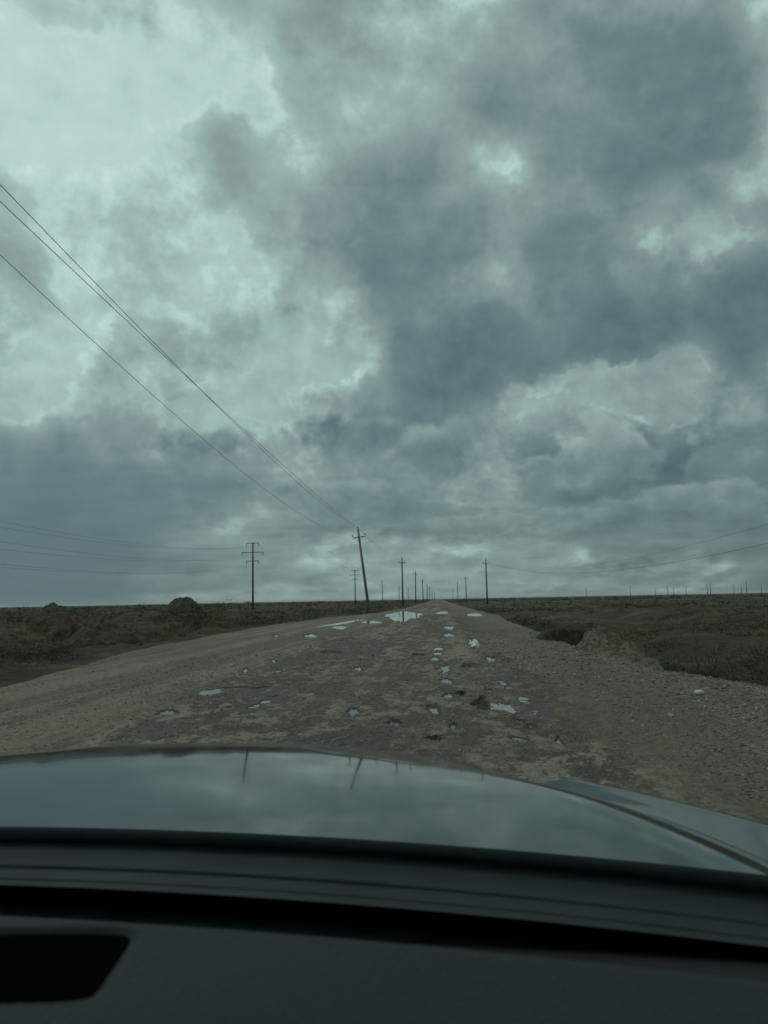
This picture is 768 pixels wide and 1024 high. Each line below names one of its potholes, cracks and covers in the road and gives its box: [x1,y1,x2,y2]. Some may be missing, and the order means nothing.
pothole [469,695,490,711]
pothole [384,611,424,623]
pothole [425,704,441,715]
pothole [466,637,482,648]
pothole [487,702,518,713]
pothole [153,708,180,716]
